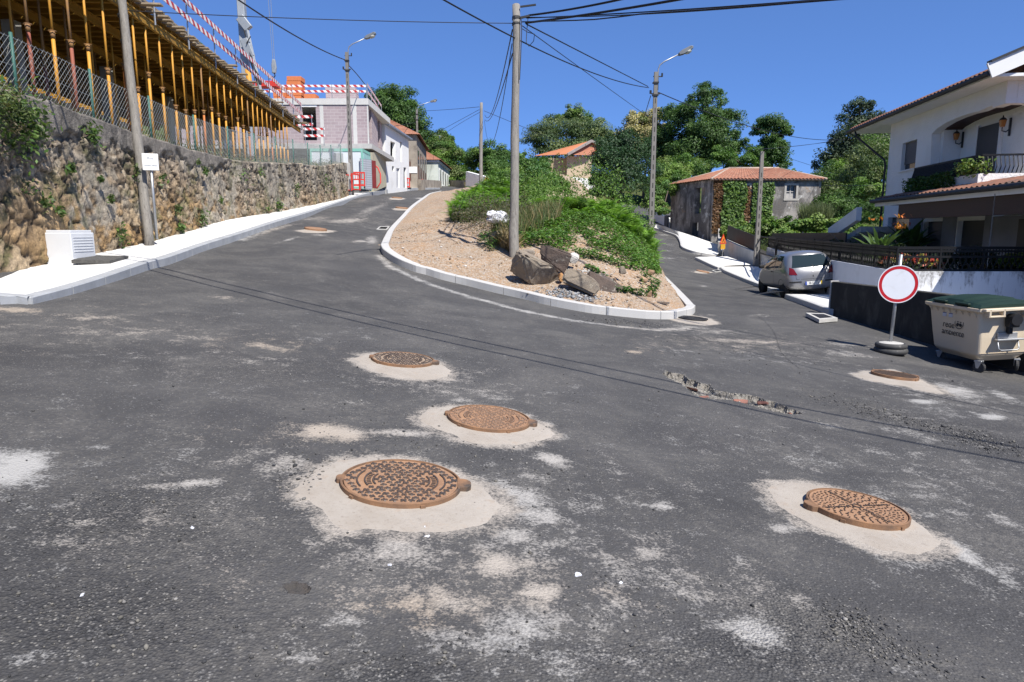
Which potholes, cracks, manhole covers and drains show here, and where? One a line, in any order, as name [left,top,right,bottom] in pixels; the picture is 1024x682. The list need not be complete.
manhole cover [859,369,944,394]
manhole cover [353,352,451,380]
manhole cover [293,457,502,532]
drain grate [806,313,838,323]
manhole cover [673,315,717,325]
manhole cover [768,483,941,555]
pothole [662,370,802,414]
manhole cover [419,405,555,445]
